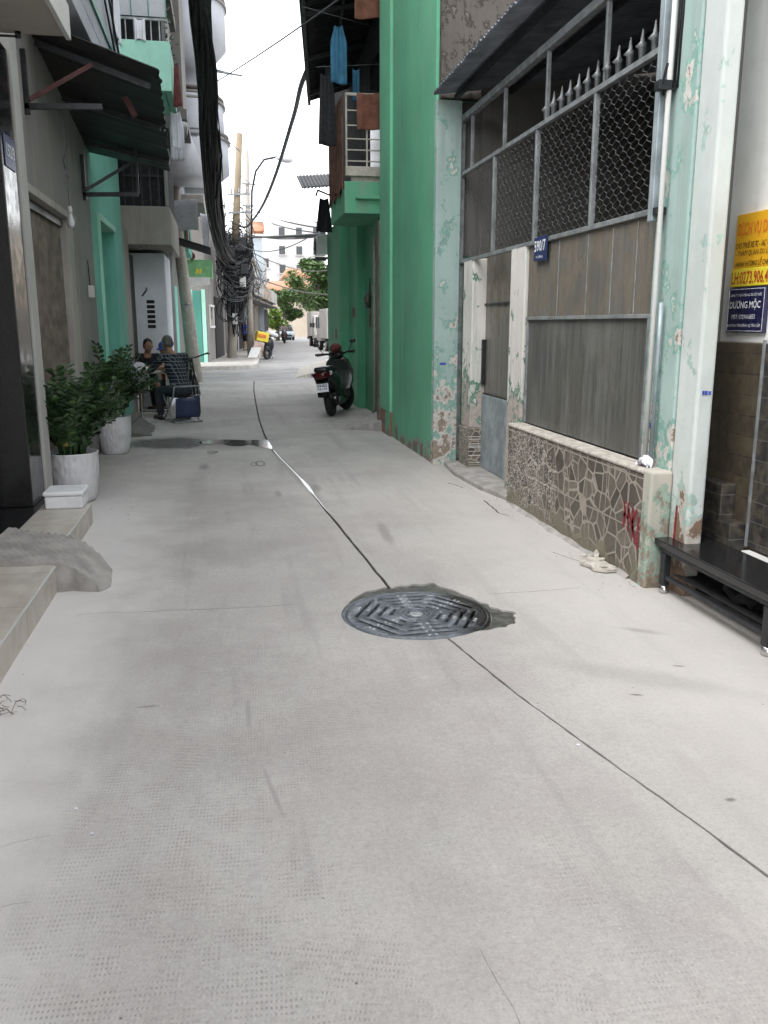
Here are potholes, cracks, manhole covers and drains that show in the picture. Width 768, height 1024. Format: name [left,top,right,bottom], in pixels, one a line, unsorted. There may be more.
manhole cover [342,591,491,640]
crack [480,949,520,1024]
